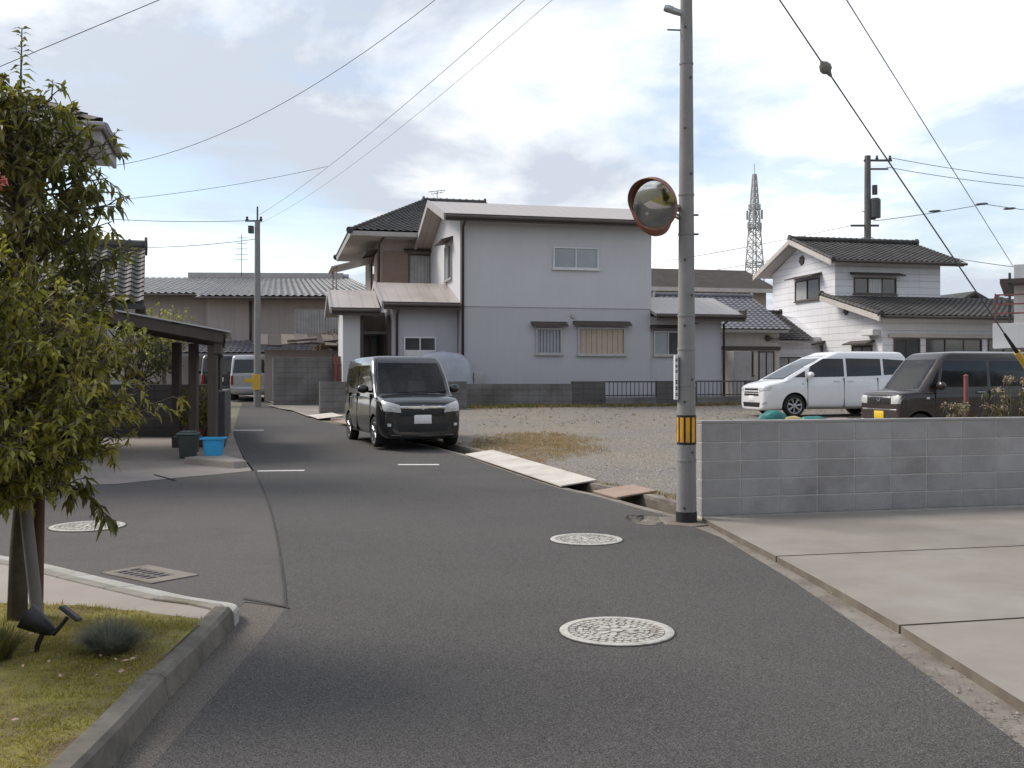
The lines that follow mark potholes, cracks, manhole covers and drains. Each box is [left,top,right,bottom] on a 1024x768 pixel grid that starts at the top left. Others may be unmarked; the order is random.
manhole cover [558,617,677,647]
manhole cover [549,533,624,546]
drain grate [101,565,199,584]
pothole [625,515,662,526]
manhole cover [47,521,127,532]
